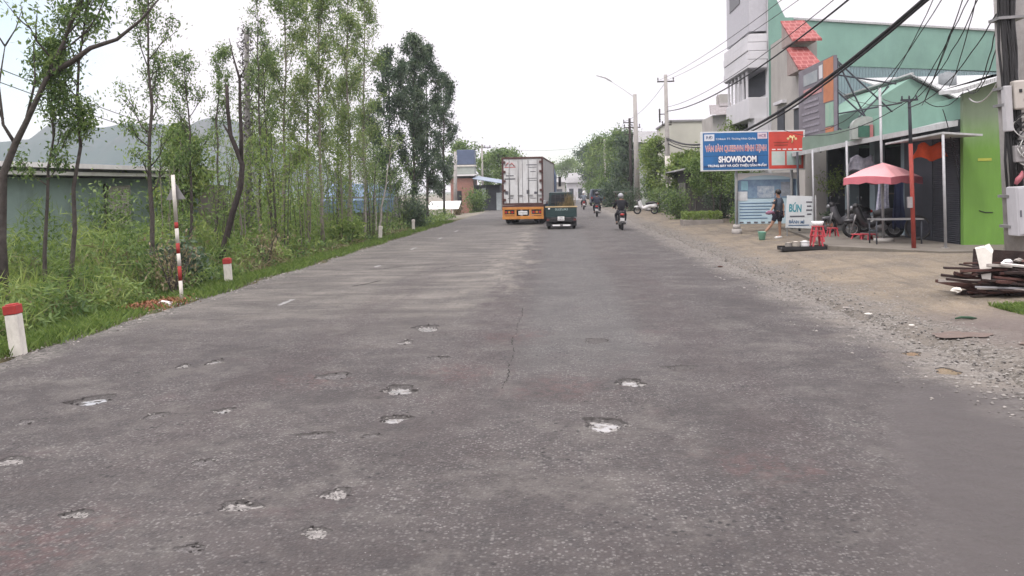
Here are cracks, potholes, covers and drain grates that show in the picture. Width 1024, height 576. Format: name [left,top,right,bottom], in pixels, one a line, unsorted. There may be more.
pothole [216,498,267,512]
pothole [378,384,420,395]
pothole [171,541,207,553]
pothole [410,323,441,332]
pothole [378,414,416,424]
pothole [60,393,118,406]
pothole [56,508,96,519]
pothole [0,455,33,466]
pothole [311,371,353,380]
pothole [580,416,632,434]
pothole [316,486,353,501]
pothole [300,525,334,540]
